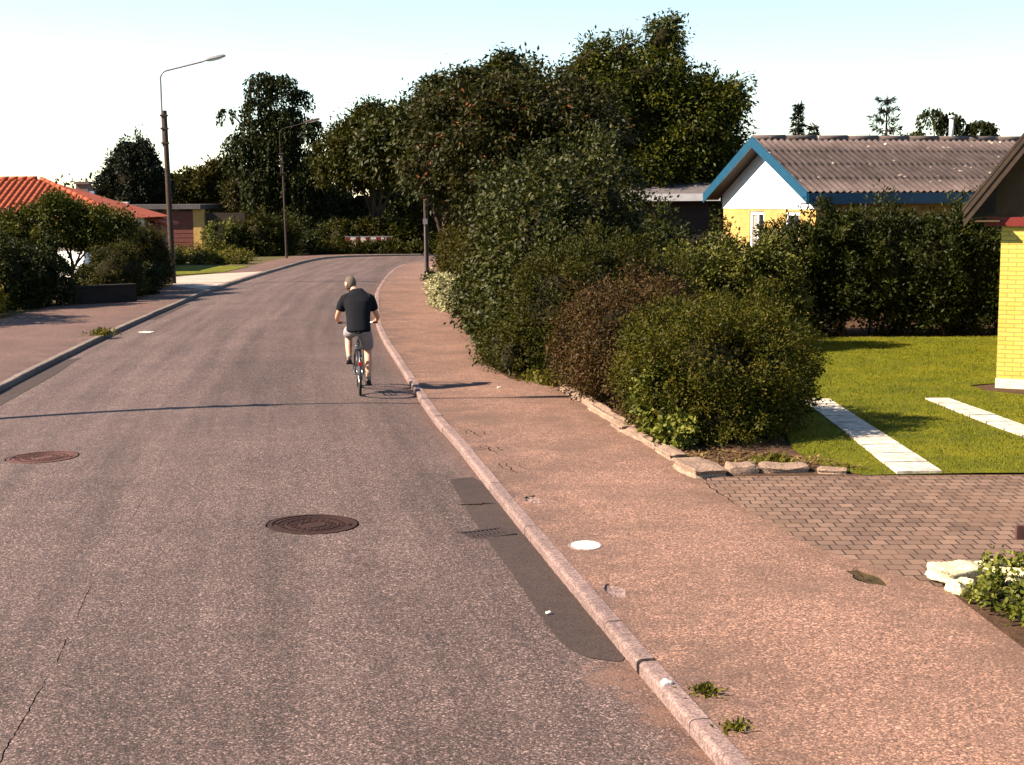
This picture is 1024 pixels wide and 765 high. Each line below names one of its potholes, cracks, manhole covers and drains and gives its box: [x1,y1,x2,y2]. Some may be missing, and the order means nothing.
manhole cover [265,514,359,535]
crack [0,451,167,763]
drain grate [458,527,517,539]
manhole cover [568,540,603,551]
manhole cover [5,451,80,464]
